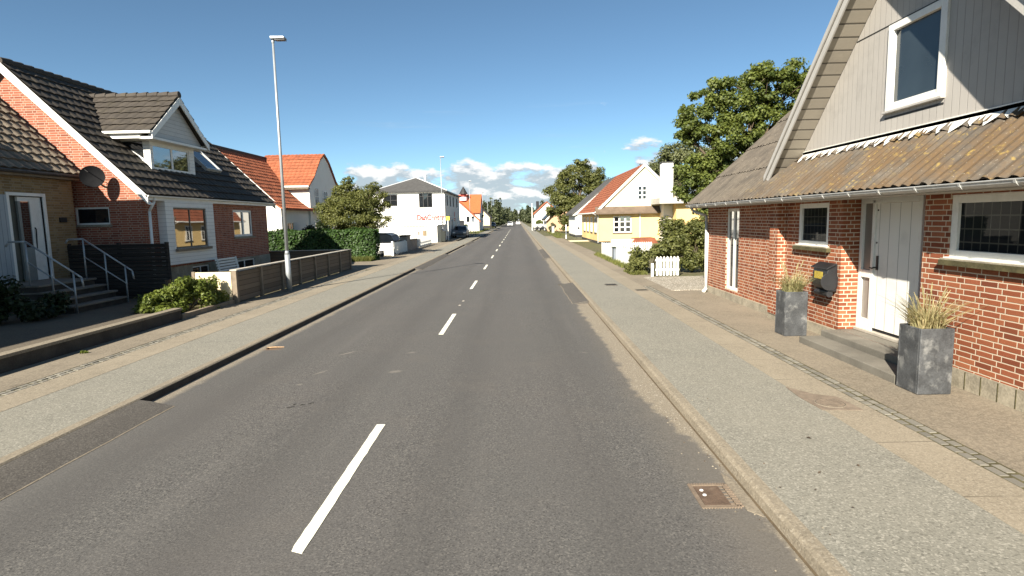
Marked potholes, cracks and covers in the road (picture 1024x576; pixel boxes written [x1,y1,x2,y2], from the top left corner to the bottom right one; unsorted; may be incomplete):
manhole cover [786,387,863,410]
